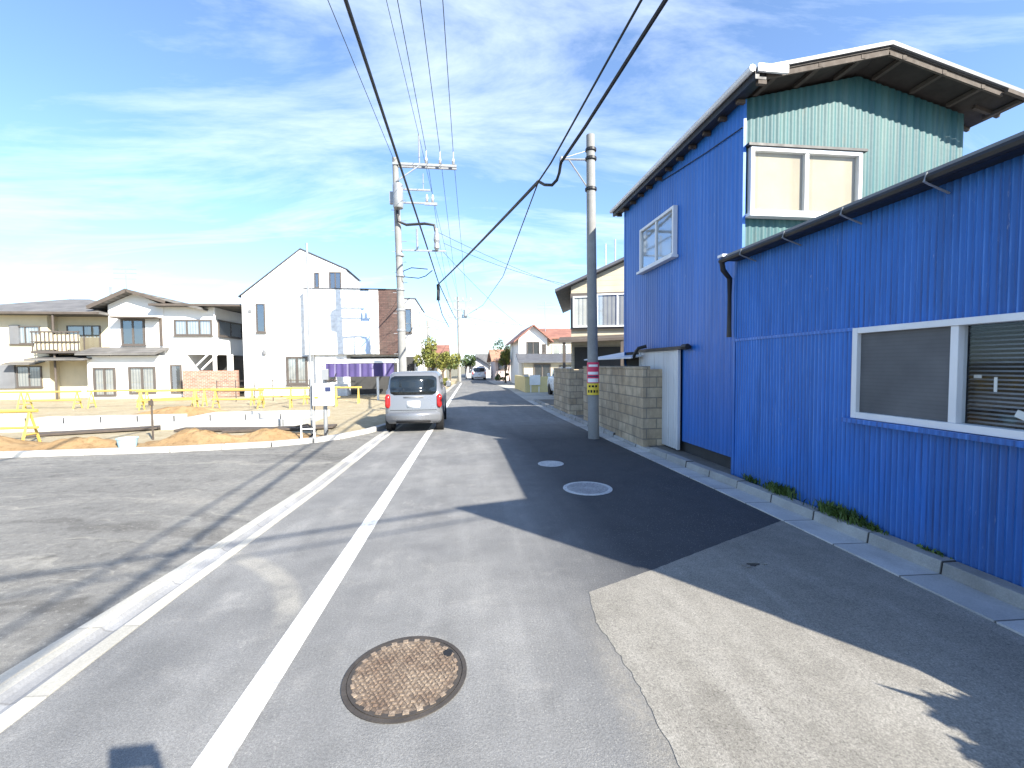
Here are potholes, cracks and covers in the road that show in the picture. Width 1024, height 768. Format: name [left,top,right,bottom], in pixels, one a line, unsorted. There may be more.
manhole cover [341,636,467,724]
manhole cover [563,481,613,496]
